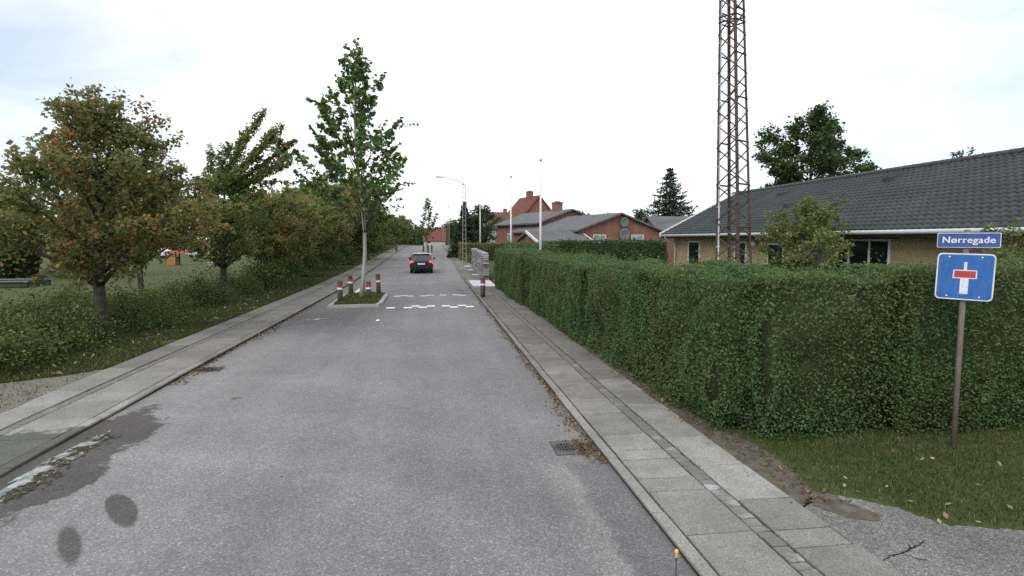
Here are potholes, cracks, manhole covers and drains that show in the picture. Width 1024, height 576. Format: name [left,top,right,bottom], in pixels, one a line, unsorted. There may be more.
drain grate [549,440,587,455]
crack [883,540,926,561]
